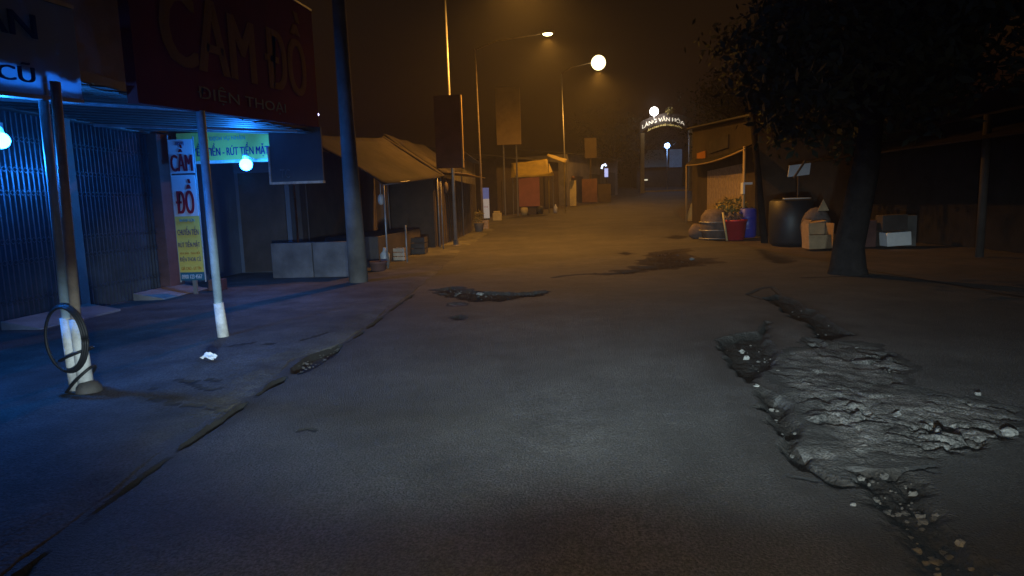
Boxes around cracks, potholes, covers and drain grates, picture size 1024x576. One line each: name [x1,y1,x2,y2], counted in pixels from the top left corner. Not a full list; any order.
pothole [751,385,854,492]
pothole [427,286,551,302]
pothole [761,294,858,341]
pothole [847,467,1024,576]
pothole [713,320,781,384]
